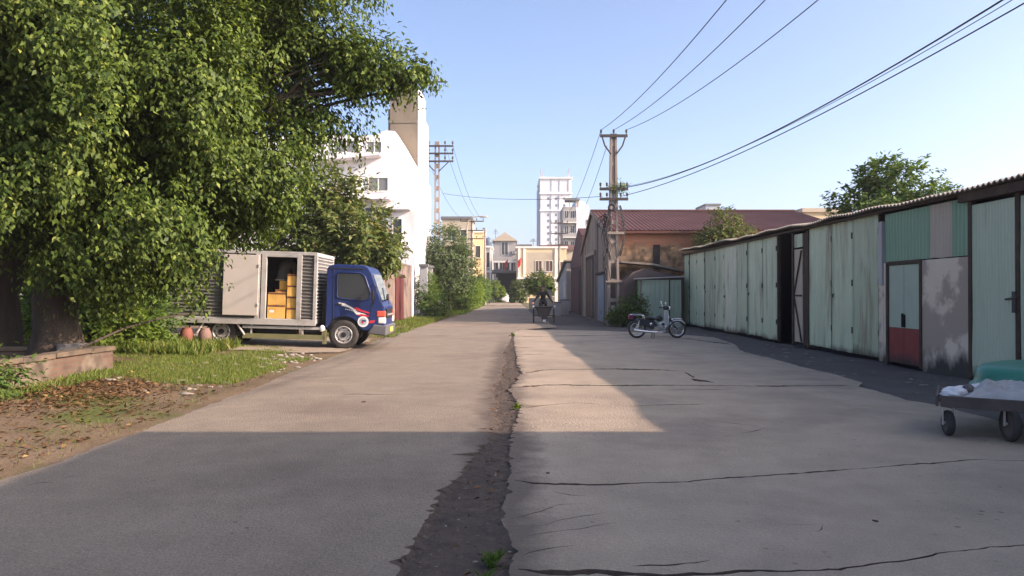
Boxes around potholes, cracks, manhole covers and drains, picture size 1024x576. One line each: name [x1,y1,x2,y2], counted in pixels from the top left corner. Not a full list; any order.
crack [375,333,1024,576]
